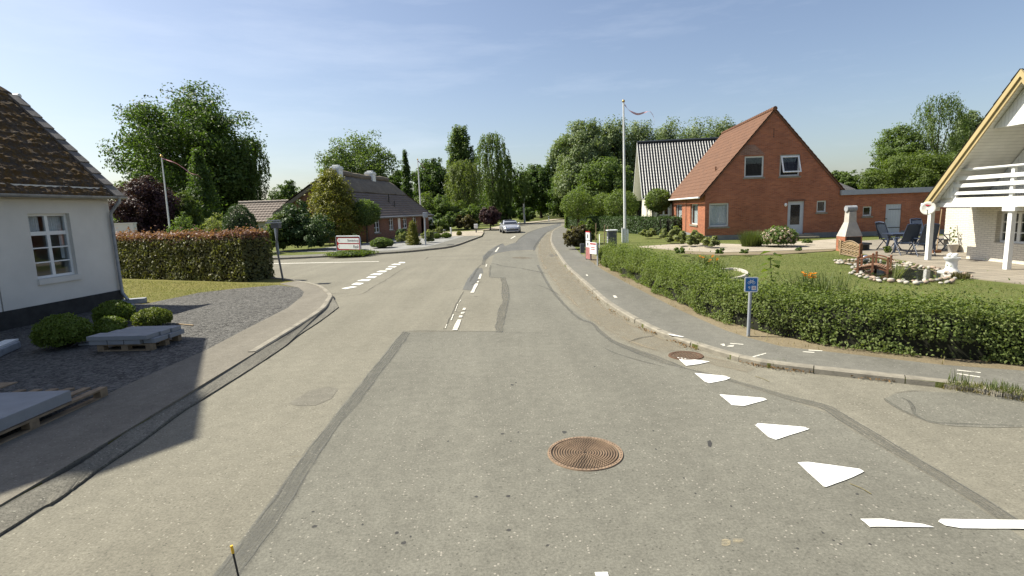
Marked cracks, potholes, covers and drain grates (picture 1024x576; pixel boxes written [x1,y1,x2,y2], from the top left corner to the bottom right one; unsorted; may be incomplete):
manhole cover [548,436,623,472]
